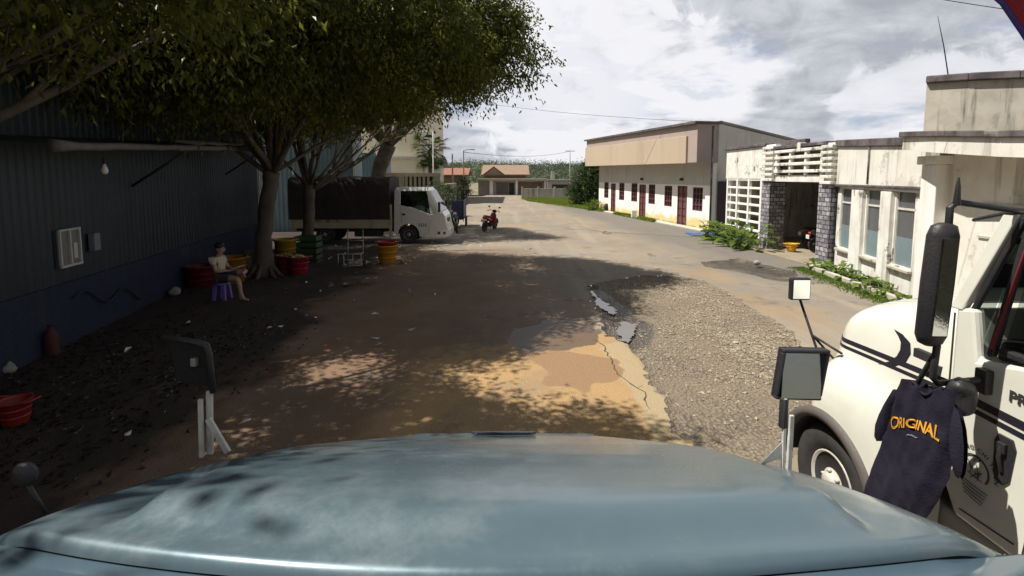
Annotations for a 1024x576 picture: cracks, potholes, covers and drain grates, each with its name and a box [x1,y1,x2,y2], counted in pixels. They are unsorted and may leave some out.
crack [594,339,650,409]
pothole [584,275,812,467]
